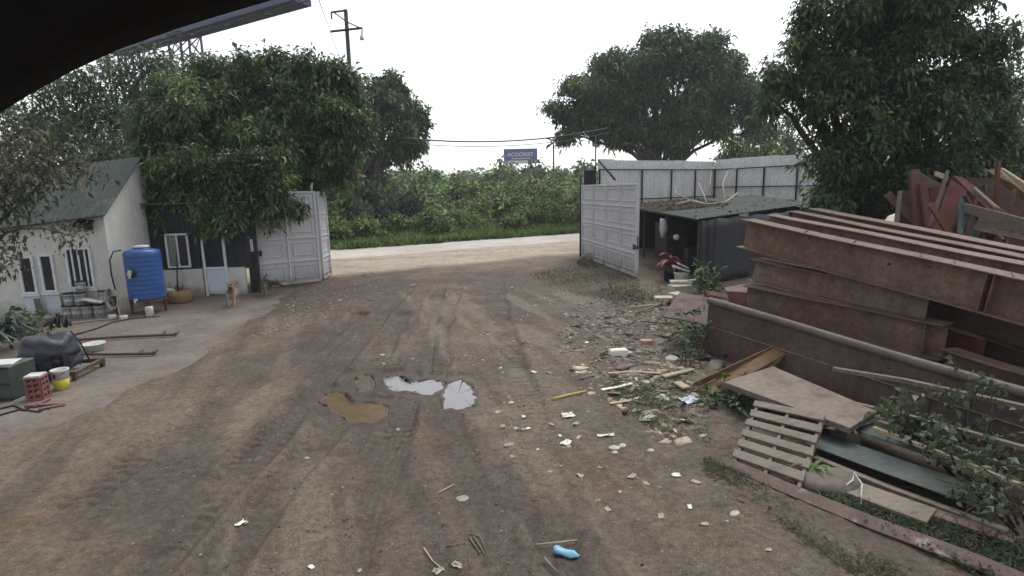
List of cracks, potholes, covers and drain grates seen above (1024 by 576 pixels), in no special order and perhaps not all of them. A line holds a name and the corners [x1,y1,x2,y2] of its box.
pothole [381,375,448,395]
pothole [319,392,389,424]
pothole [440,378,480,410]
pothole [354,375,375,392]
